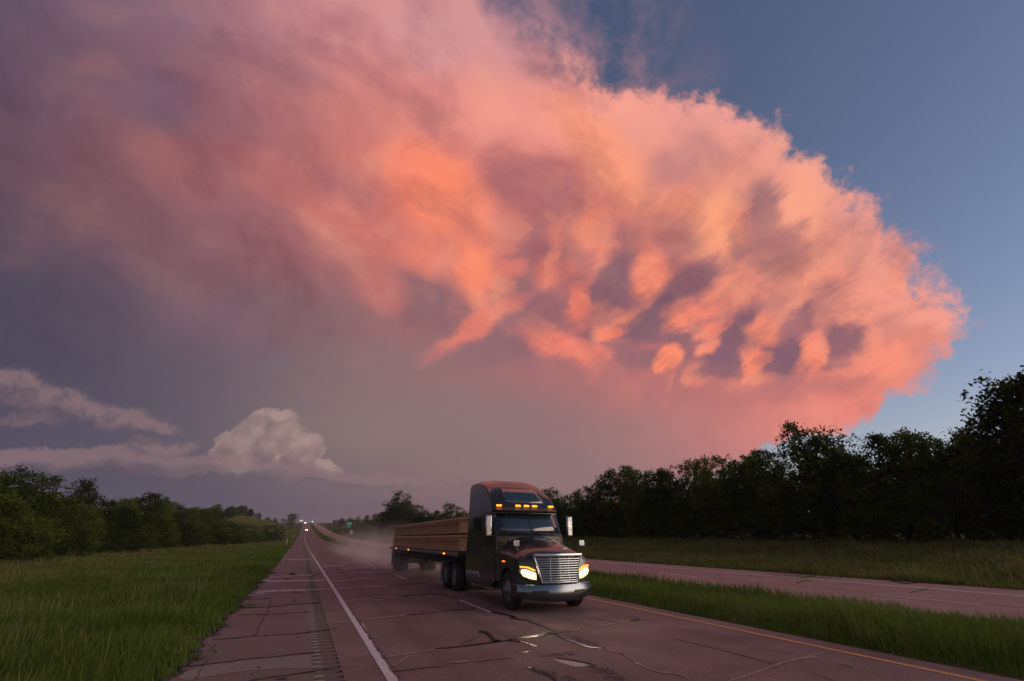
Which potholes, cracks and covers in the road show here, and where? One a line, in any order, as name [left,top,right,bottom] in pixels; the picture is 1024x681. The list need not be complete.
crack [181,598,339,680]
